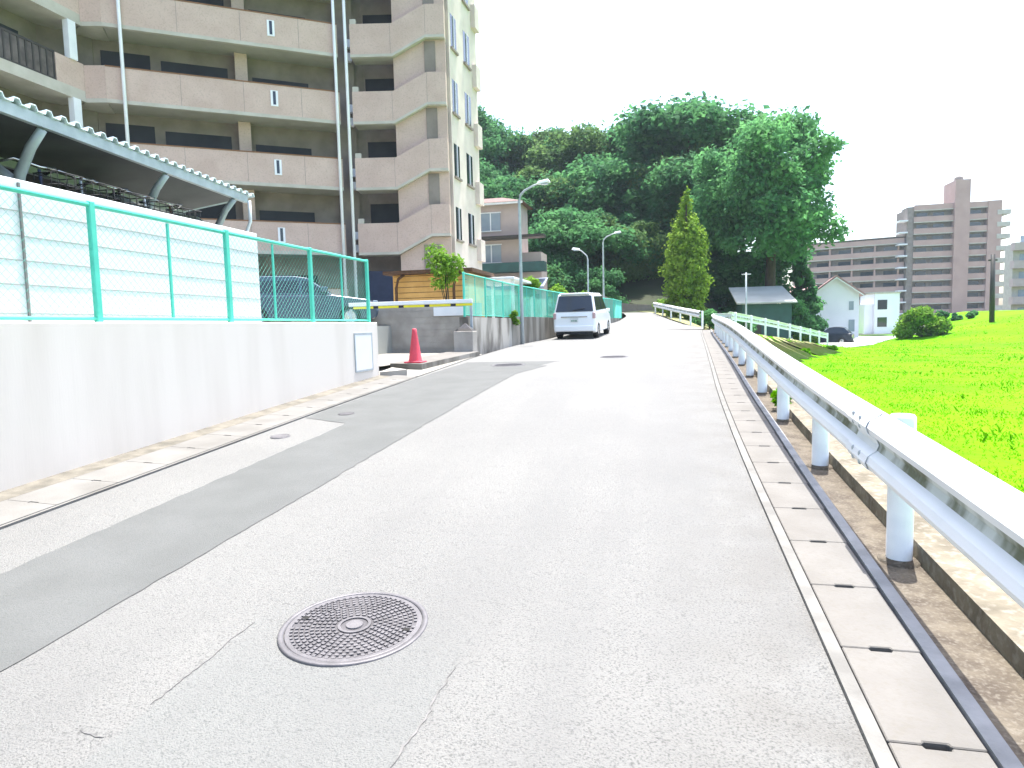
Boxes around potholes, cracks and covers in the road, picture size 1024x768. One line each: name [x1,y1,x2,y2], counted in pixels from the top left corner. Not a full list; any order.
crack [390,667,456,768]
crack [150,623,253,705]
manhole cover [277,592,428,667]
